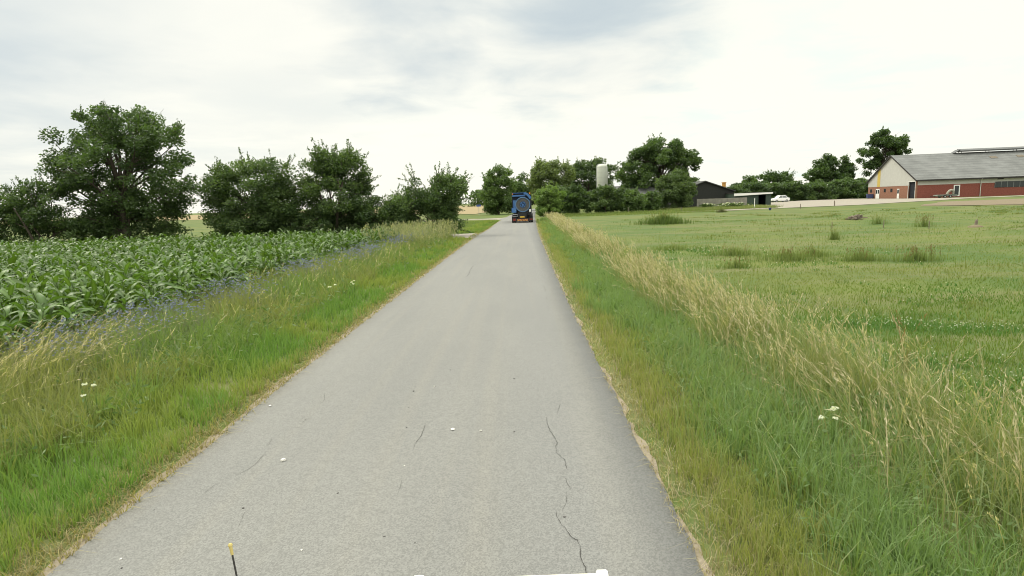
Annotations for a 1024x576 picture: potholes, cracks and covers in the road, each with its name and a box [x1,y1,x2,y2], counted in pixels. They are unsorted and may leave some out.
crack [546,403,586,571]
